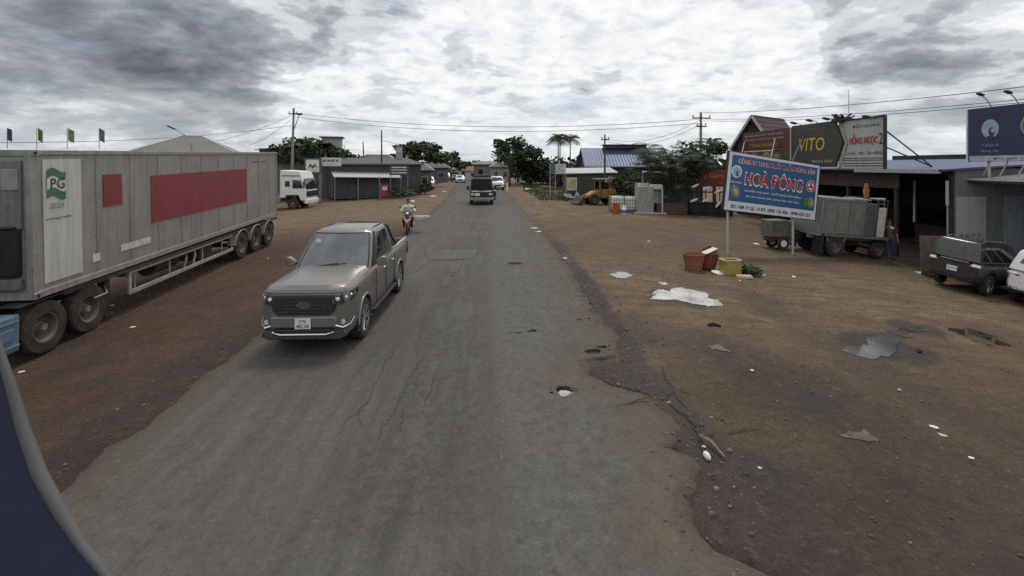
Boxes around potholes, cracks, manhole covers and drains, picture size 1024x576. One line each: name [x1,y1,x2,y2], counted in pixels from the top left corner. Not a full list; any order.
crack [605,366,762,455]
crack [497,339,516,524]
crack [378,350,440,439]
pothole [551,384,582,400]
pothole [580,348,606,357]
crack [335,344,399,438]
pothole [935,325,1024,352]
